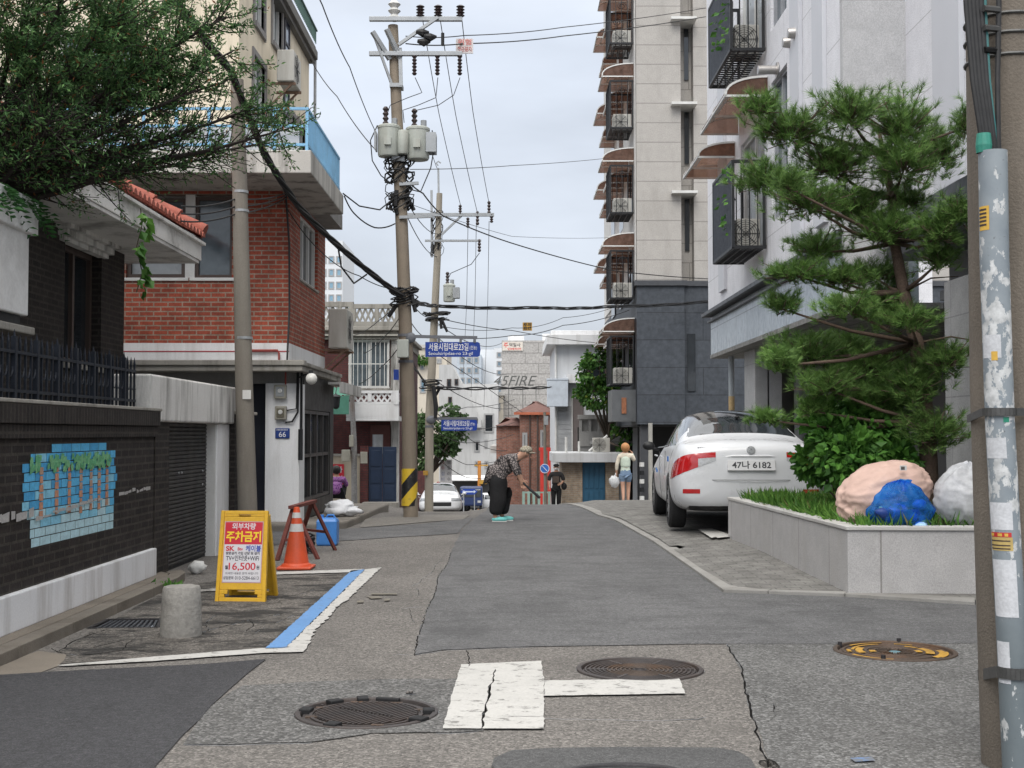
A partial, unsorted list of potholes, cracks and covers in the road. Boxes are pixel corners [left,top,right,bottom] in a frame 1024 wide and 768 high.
manhole cover [576,657,704,680]
crack [409,553,451,656]
manhole cover [294,695,438,743]
crack [727,645,775,768]
crack [253,671,496,745]
manhole cover [833,638,959,662]
drain grate [87,618,160,635]
